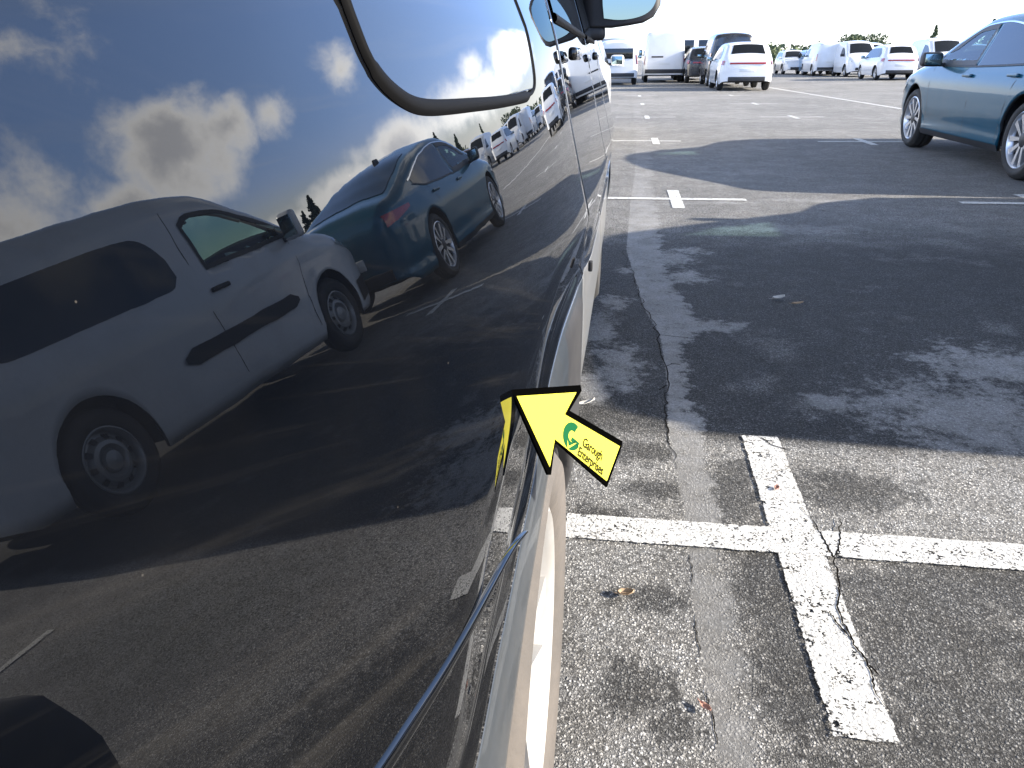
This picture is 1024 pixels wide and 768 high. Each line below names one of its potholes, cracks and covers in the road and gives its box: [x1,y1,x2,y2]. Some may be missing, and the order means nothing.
crack [800,506,892,714]
crack [622,251,718,750]
